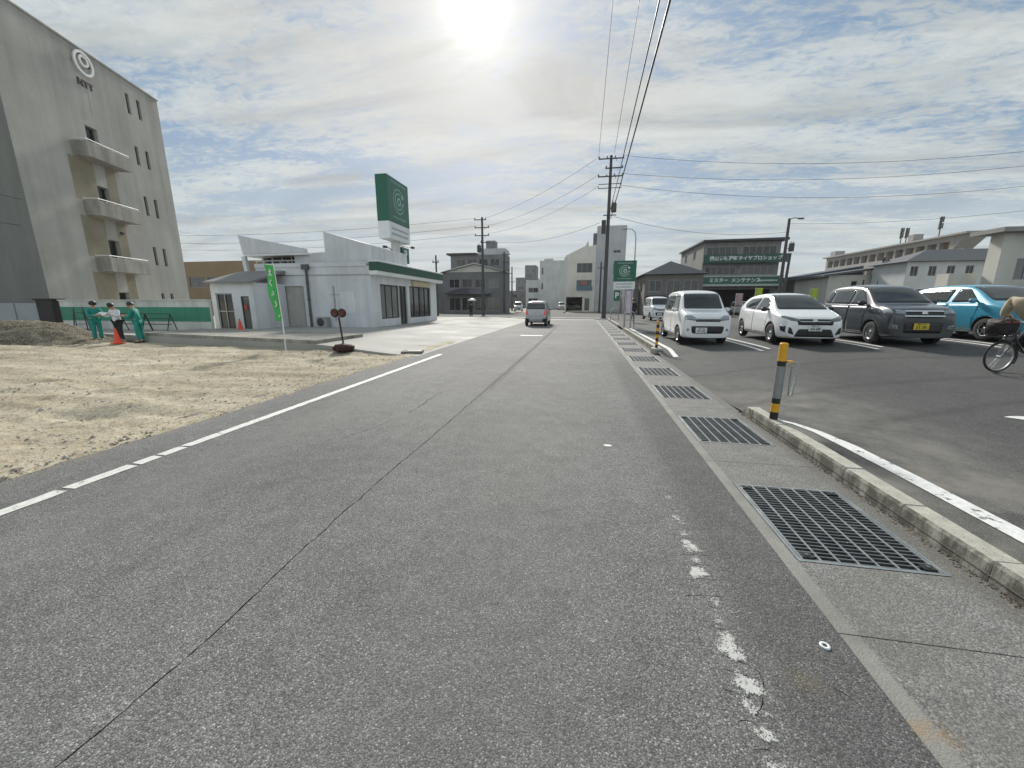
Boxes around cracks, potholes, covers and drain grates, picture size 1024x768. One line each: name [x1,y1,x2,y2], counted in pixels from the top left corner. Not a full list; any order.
drain grate [652,385,713,400]
drain grate [734,483,952,577]
drain grate [677,416,775,446]
drain grate [637,367,680,376]
